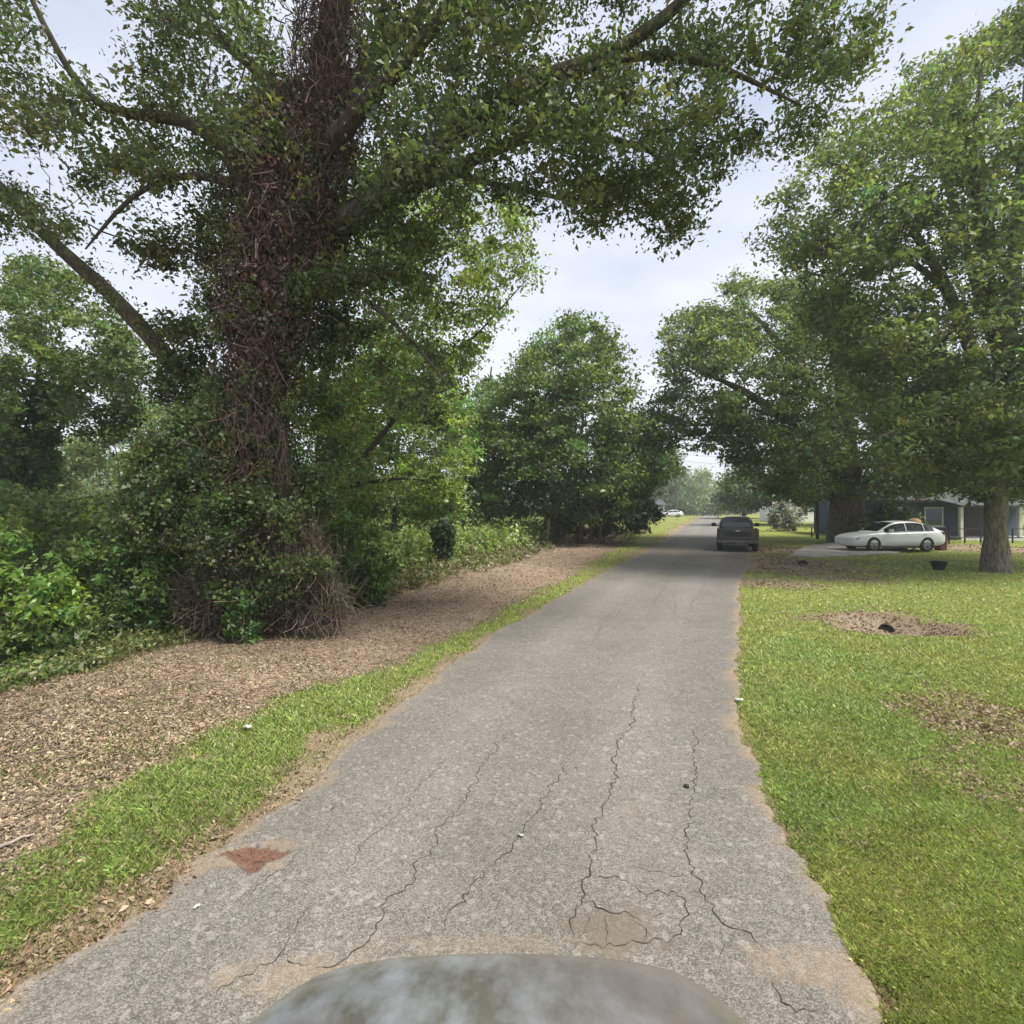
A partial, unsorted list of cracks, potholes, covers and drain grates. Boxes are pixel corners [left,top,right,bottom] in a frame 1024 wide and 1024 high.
crack [771,977,821,1013]
crack [444,761,564,931]
crack [319,729,514,967]
crack [569,683,761,955]
